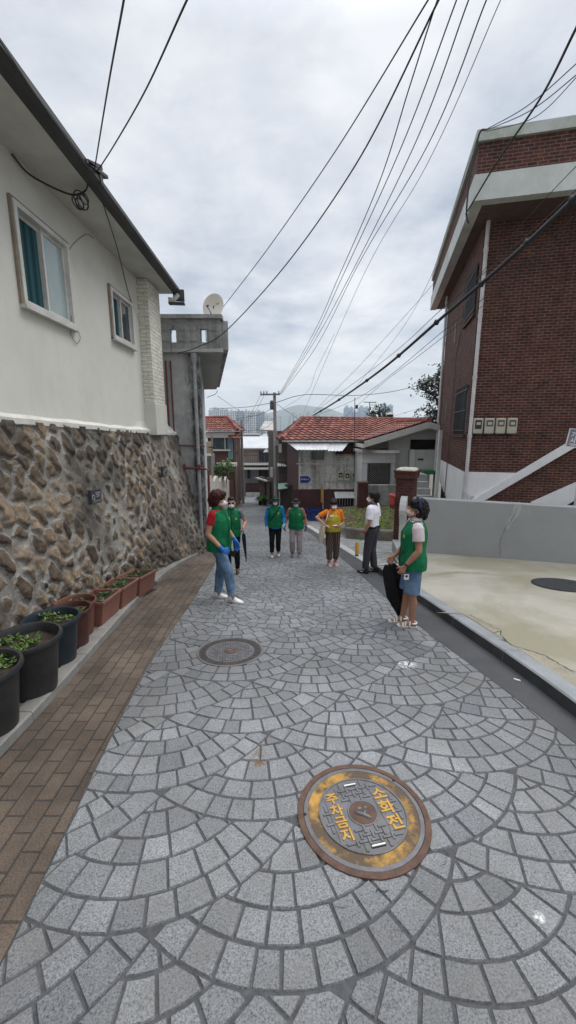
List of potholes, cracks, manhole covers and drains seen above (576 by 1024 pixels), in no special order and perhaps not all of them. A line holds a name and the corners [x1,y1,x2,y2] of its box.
crack [469,614,575,672]
manhole cover [298,764,432,881]
manhole cover [196,637,264,668]
manhole cover [531,578,576,593]
